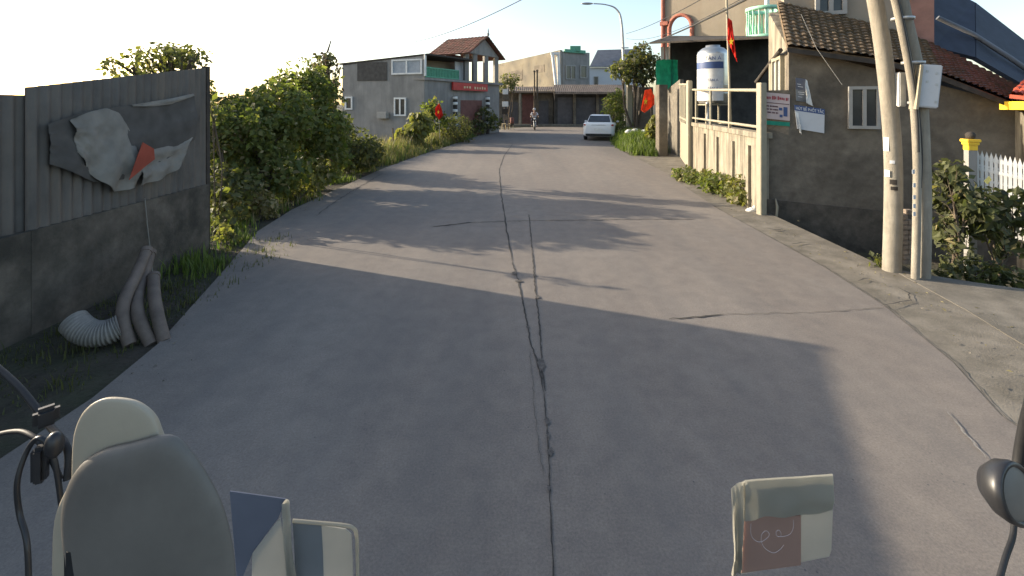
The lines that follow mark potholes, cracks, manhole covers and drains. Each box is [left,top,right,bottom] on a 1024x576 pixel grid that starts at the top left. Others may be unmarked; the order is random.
crack [499,144,554,576]
